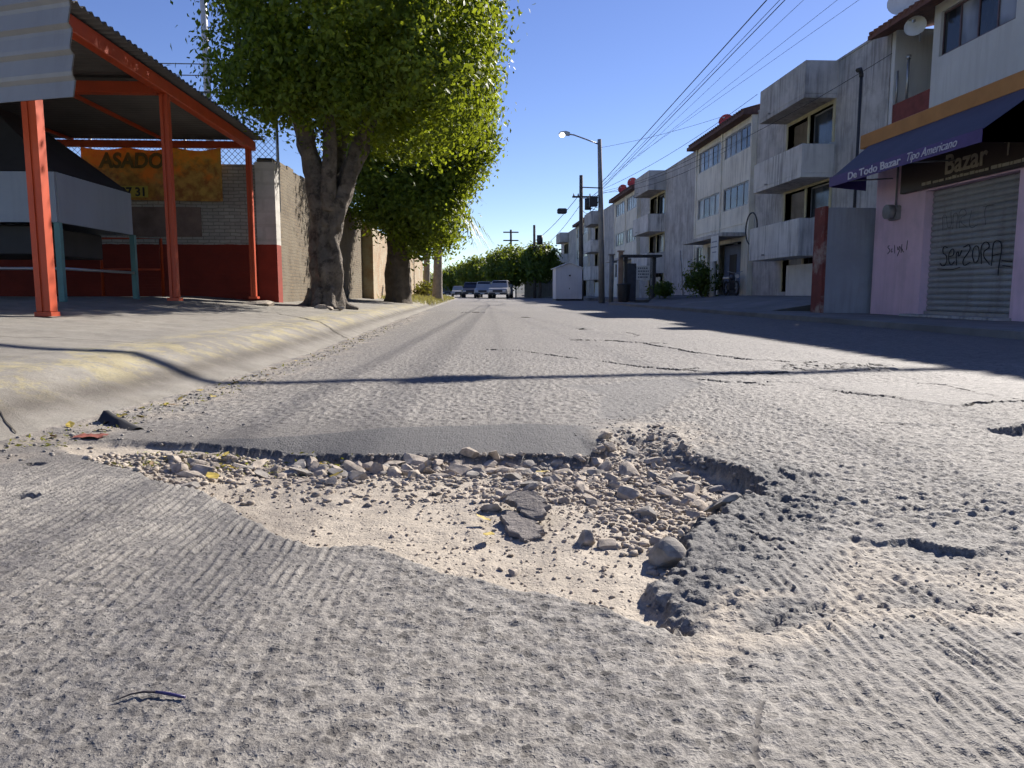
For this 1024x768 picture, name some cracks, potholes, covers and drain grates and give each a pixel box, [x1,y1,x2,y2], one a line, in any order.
pothole [25,424,1024,652]
crack [835,383,1024,407]
crack [486,328,894,386]
